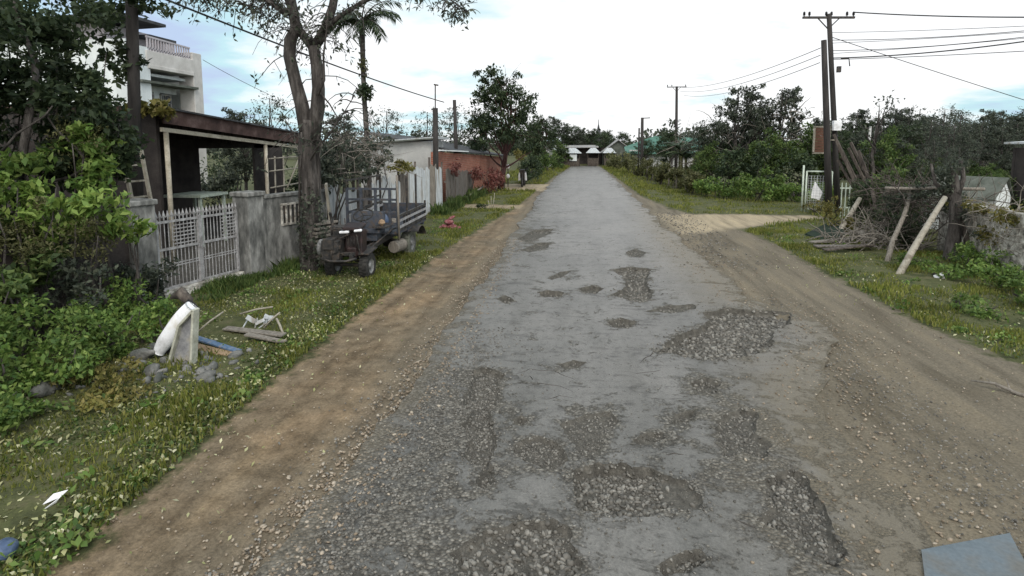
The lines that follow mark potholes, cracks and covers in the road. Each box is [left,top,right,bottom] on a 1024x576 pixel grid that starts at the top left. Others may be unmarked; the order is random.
pothole [647,306,792,366]
pothole [522,242,552,253]
pothole [552,448,757,547]
pothole [423,363,522,503]
pothole [559,360,587,369]
pothole [505,425,597,482]
pothole [626,247,646,257]
pothole [604,317,639,329]
pothole [714,453,868,576]
pothole [517,229,553,242]
pothole [604,266,668,303]
pothole [428,490,614,576]
